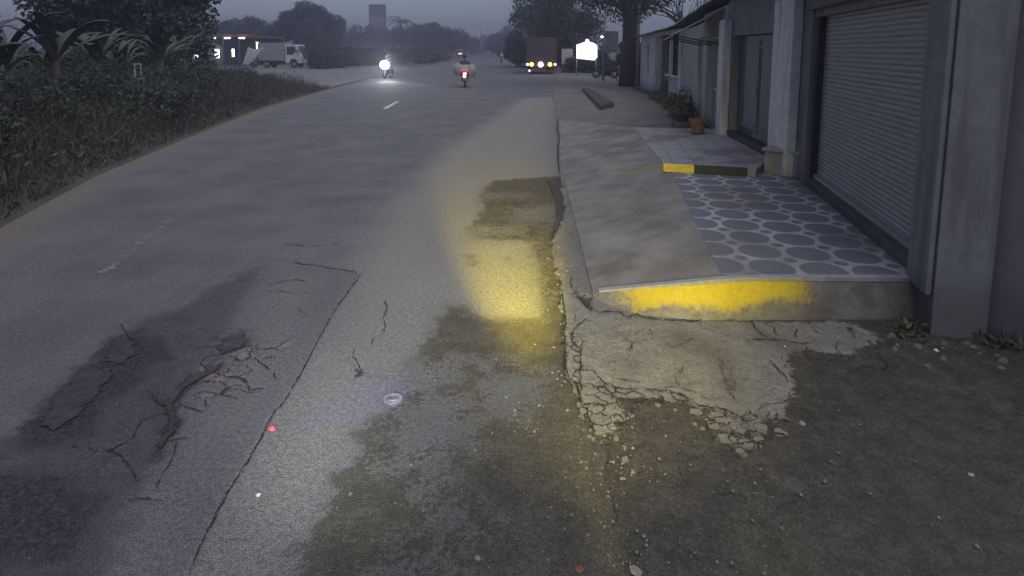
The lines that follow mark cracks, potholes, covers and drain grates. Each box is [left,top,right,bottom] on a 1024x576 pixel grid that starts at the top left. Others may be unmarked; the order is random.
crack [561,278,927,455]
crack [128,437,186,500]
crack [71,340,287,479]
crack [352,300,387,373]
